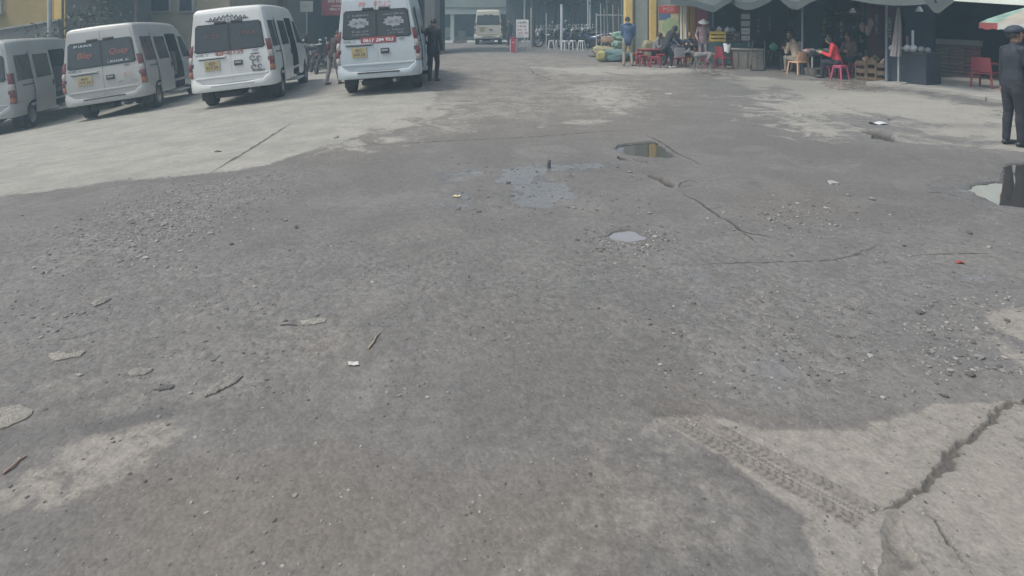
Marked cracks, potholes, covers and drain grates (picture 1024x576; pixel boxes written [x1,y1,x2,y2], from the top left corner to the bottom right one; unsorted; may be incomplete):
crack [336,129,879,266]
pothole [606,229,652,244]
crack [211,122,293,173]
crack [881,398,1024,576]
pothole [613,141,677,159]
pothole [962,162,1024,209]
